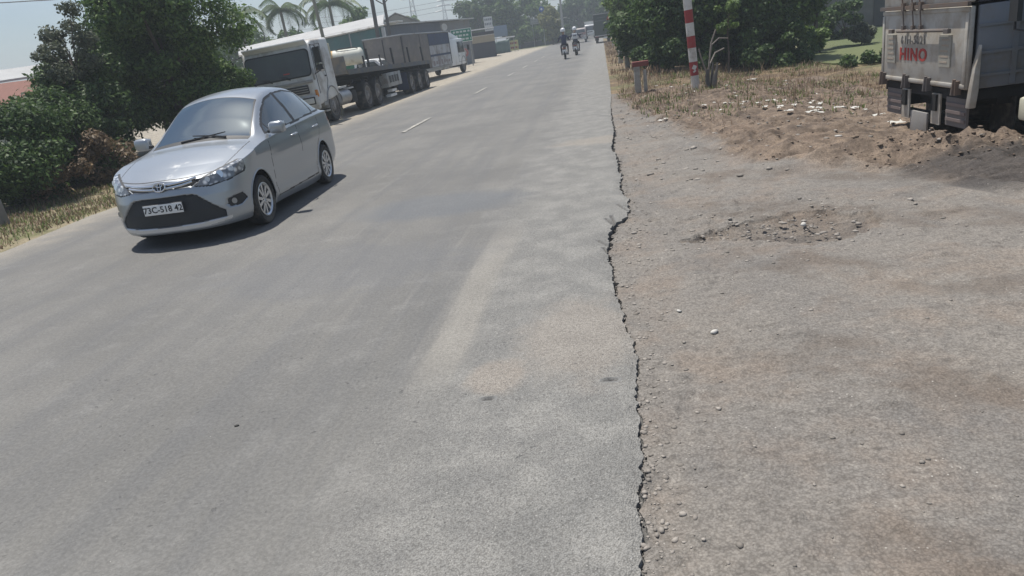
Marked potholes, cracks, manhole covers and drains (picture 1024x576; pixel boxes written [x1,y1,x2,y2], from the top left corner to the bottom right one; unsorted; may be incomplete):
crack [593,109,649,576]
pothole [678,210,884,246]
